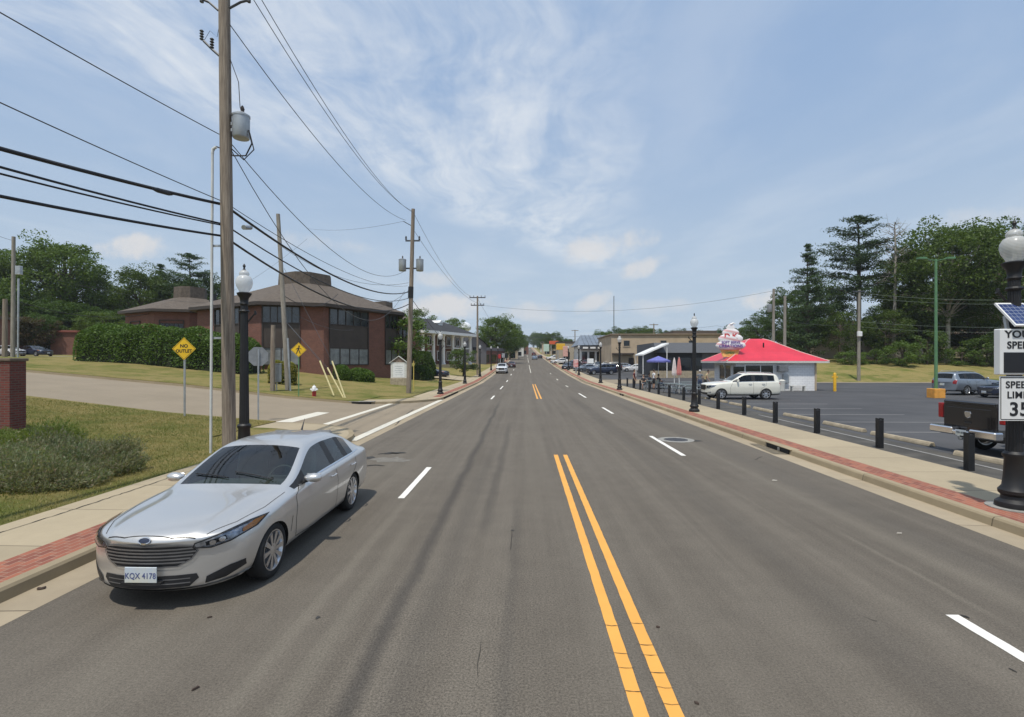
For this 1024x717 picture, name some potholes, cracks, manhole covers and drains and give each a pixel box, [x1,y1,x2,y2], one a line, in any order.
drain grate [752,441,799,454]
